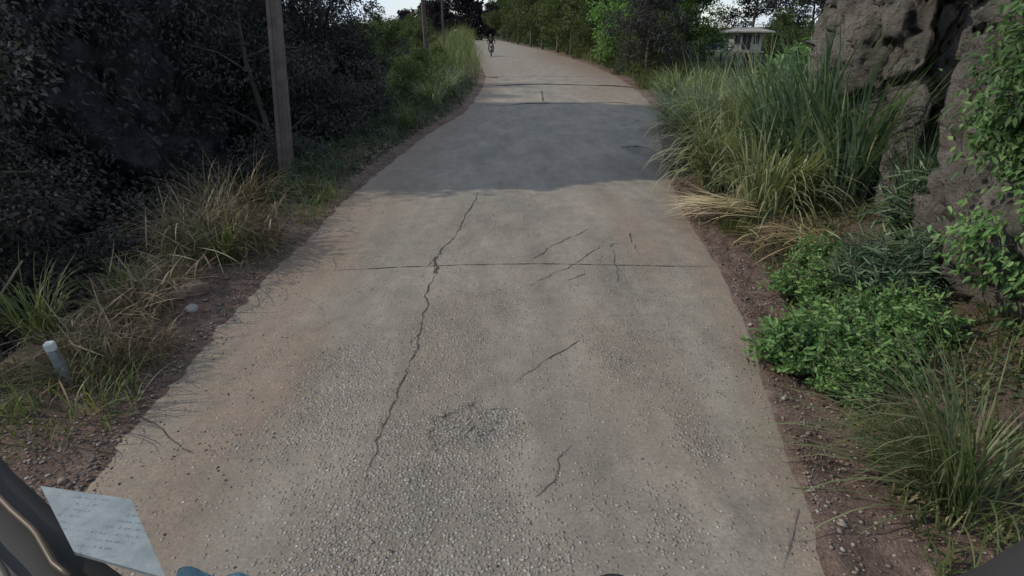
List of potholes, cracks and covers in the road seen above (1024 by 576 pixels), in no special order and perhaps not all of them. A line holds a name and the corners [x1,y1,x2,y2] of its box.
crack [529,229,636,288]
crack [362,198,477,496]
pothole [416,397,544,460]
